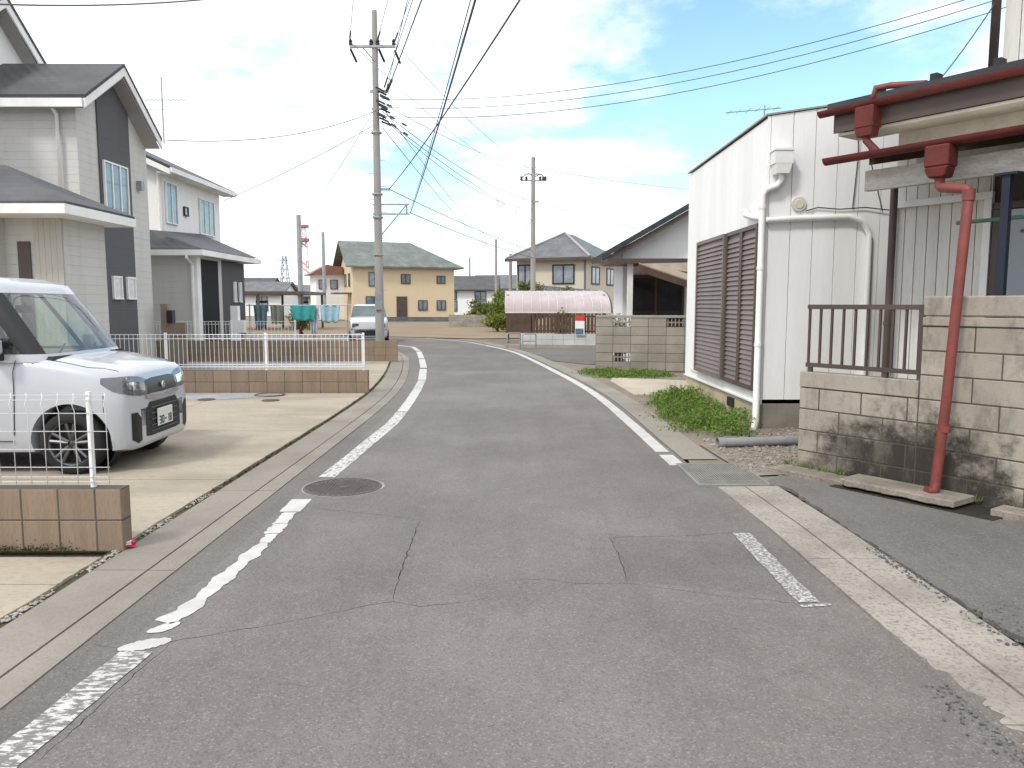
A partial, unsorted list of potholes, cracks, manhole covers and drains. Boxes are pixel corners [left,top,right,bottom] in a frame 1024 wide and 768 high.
manhole cover [301,478,385,497]
drain grate [676,463,771,487]
